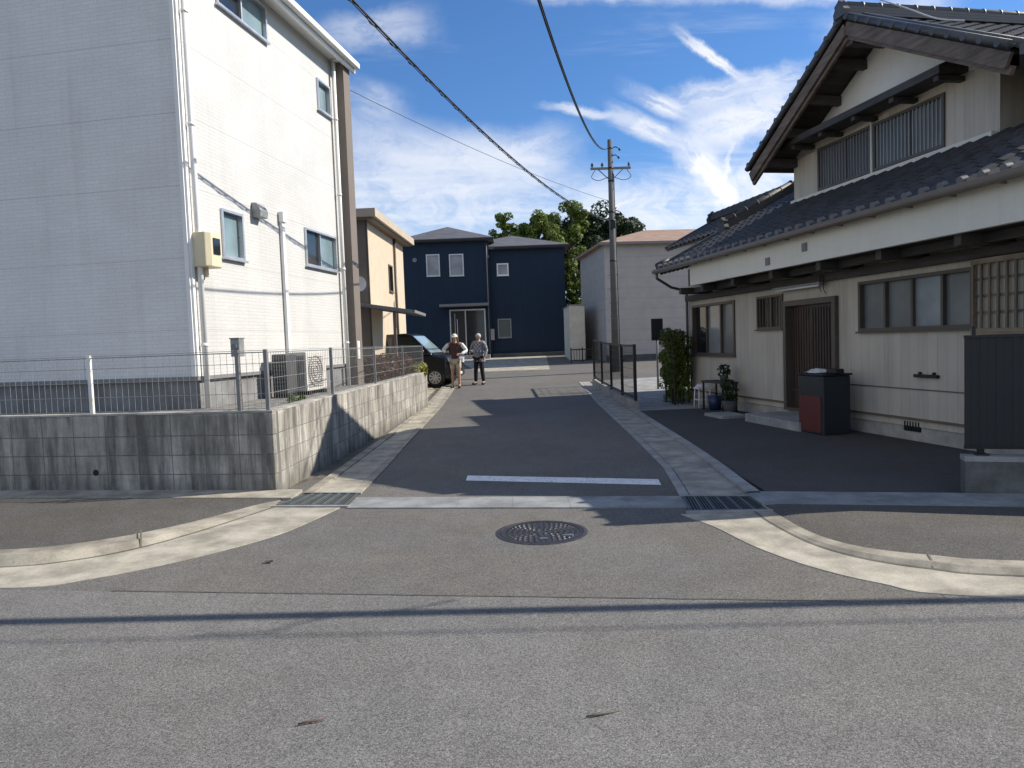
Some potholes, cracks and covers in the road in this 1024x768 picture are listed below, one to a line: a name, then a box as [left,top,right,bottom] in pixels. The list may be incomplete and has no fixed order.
manhole cover [495,520,588,545]
drain grate [271,492,362,508]
drain grate [679,495,773,514]
